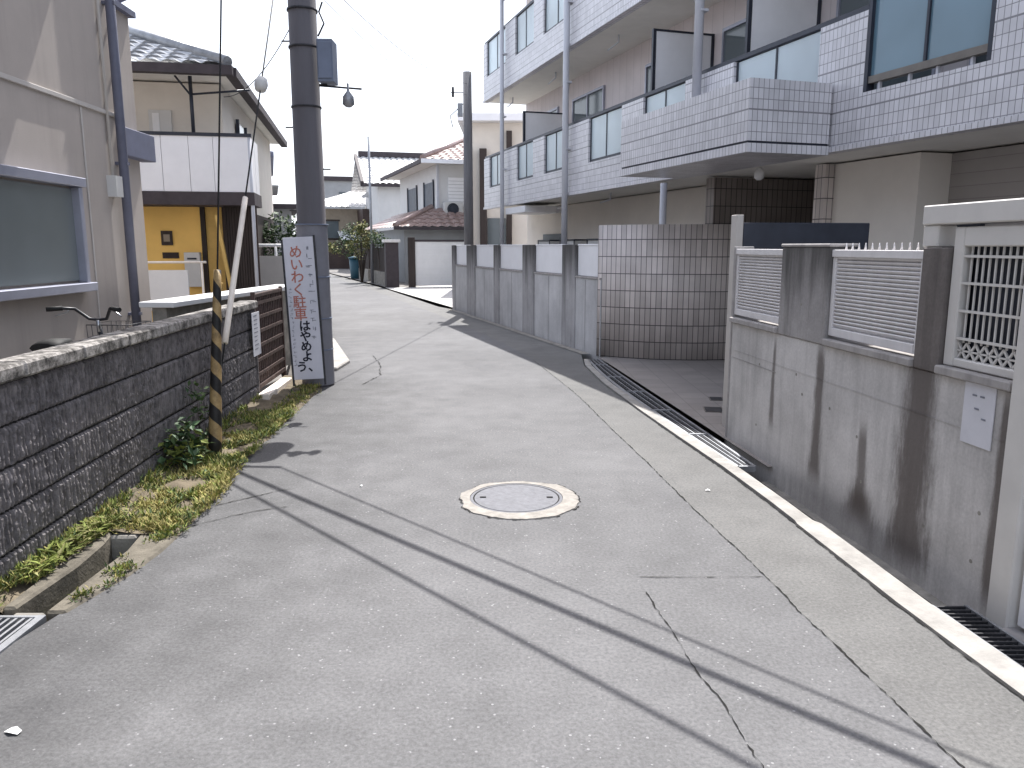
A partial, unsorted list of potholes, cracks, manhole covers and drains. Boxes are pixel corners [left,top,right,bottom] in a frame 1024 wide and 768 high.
crack [535,361,965,768]
crack [658,424,1024,700]
manhole cover [459,481,581,520]
drain grate [0,615,47,654]
drain grate [588,359,756,472]
drain grate [933,605,1024,668]
